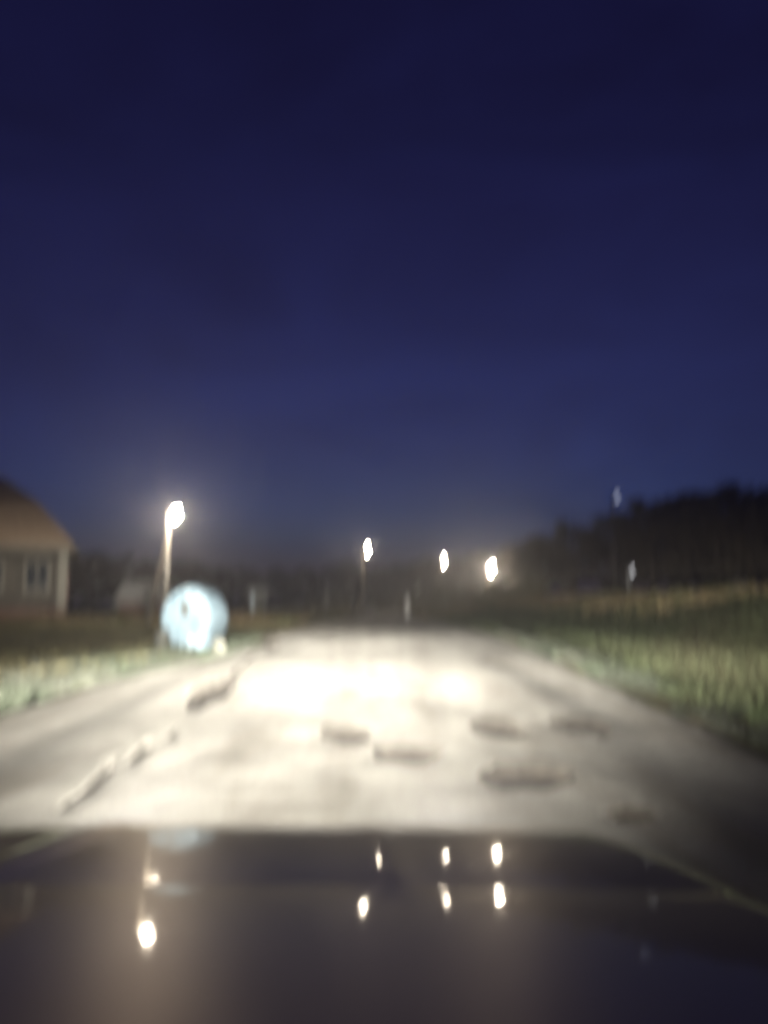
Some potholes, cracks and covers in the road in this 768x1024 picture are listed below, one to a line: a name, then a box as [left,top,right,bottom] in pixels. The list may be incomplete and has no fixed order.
pothole [365,745,453,766]
pothole [177,675,244,714]
pothole [543,716,619,740]
pothole [468,762,586,792]
pothole [314,725,378,747]
pothole [597,807,660,824]
pothole [463,718,536,740]
